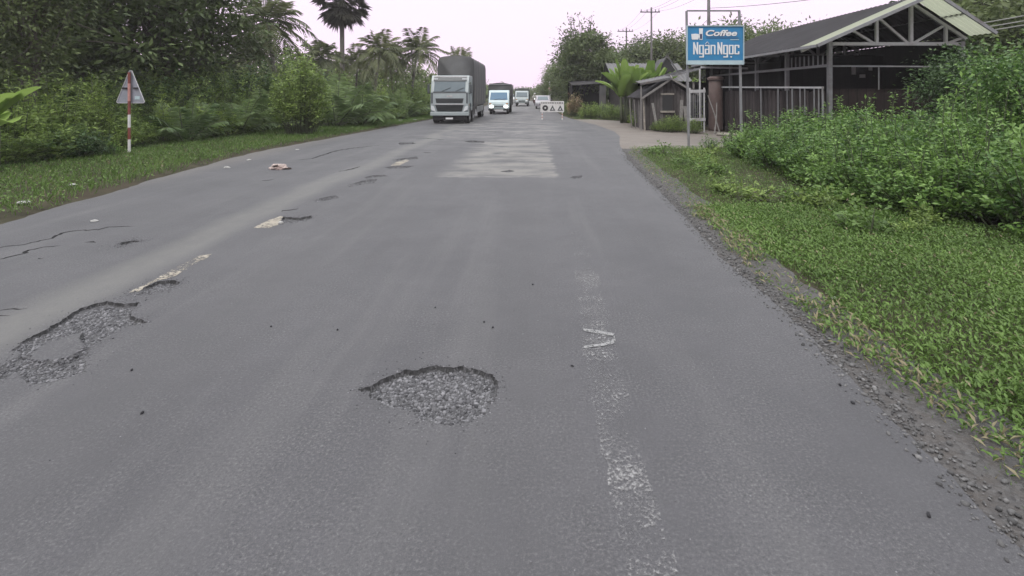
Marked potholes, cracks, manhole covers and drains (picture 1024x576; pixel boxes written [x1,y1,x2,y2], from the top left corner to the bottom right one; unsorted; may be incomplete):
crack [0,226,131,260]
pothole [0,297,154,396]
pothole [347,179,377,187]
pothole [281,211,324,226]
pothole [337,351,533,454]
pothole [102,274,203,303]
